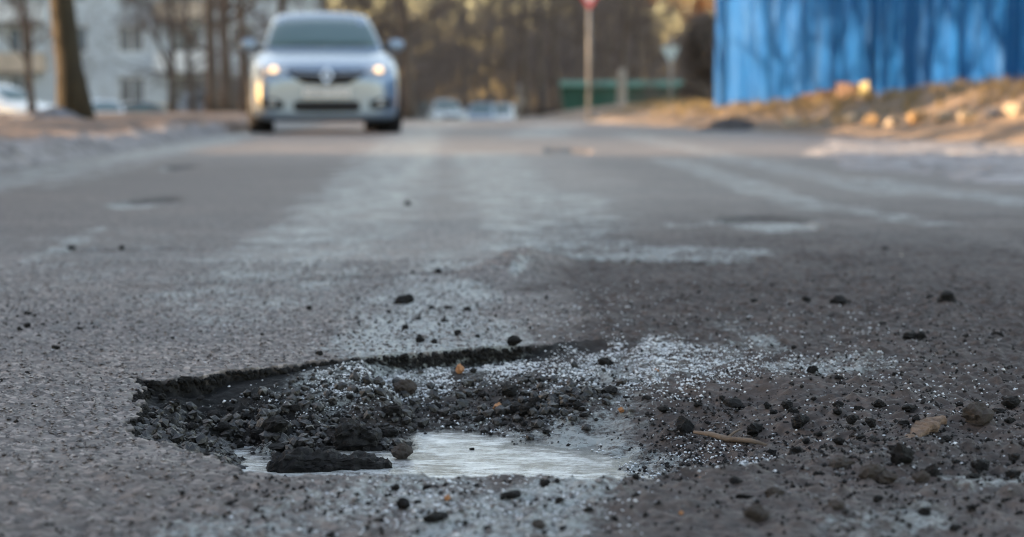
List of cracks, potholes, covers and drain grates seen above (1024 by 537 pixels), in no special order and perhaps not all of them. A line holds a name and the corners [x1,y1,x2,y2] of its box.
pothole [123,335,875,481]
pothole [99,197,185,210]
pothole [708,215,835,233]
pothole [539,147,595,155]
